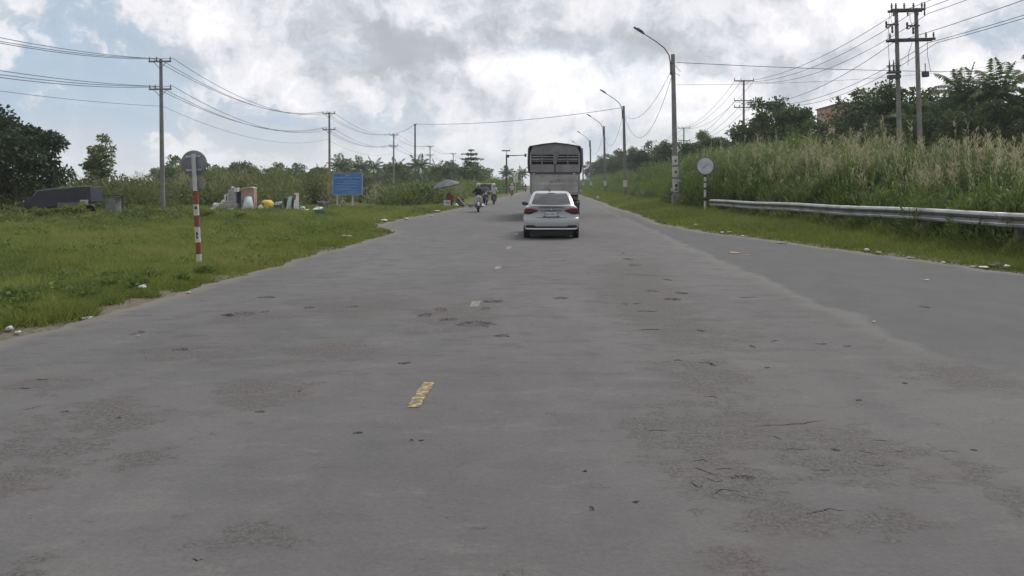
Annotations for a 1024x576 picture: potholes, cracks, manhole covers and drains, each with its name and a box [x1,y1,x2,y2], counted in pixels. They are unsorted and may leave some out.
crack [690,459,747,498]
crack [757,420,827,451]
